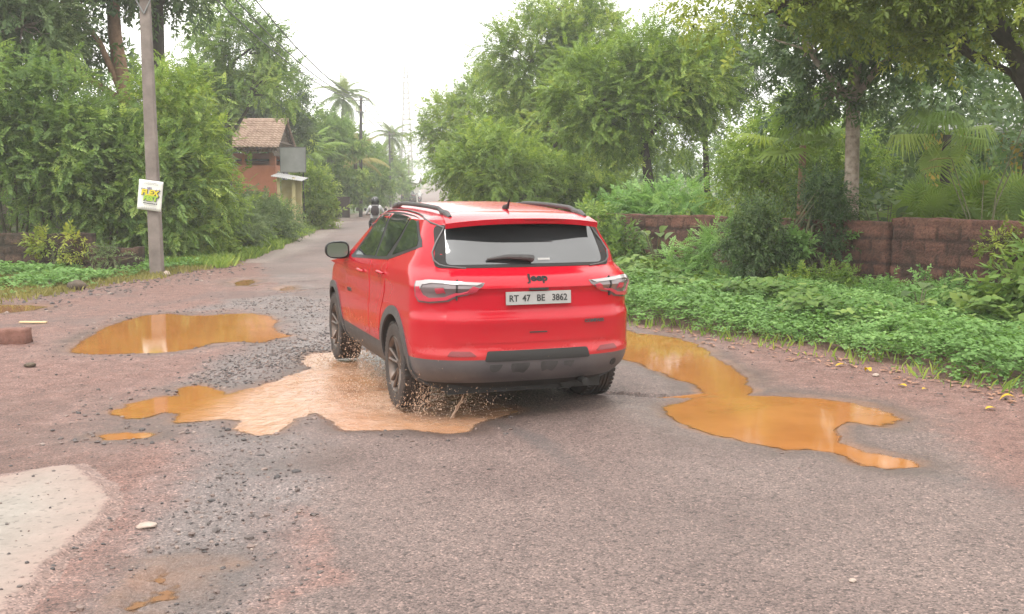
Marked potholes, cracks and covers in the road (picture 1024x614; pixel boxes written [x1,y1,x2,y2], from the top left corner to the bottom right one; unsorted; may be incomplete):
pothole [63,312,297,355]
pothole [94,552,251,614]
pothole [621,327,933,472]
pothole [84,430,164,442]
pothole [100,348,529,436]
pothole [226,278,263,287]
